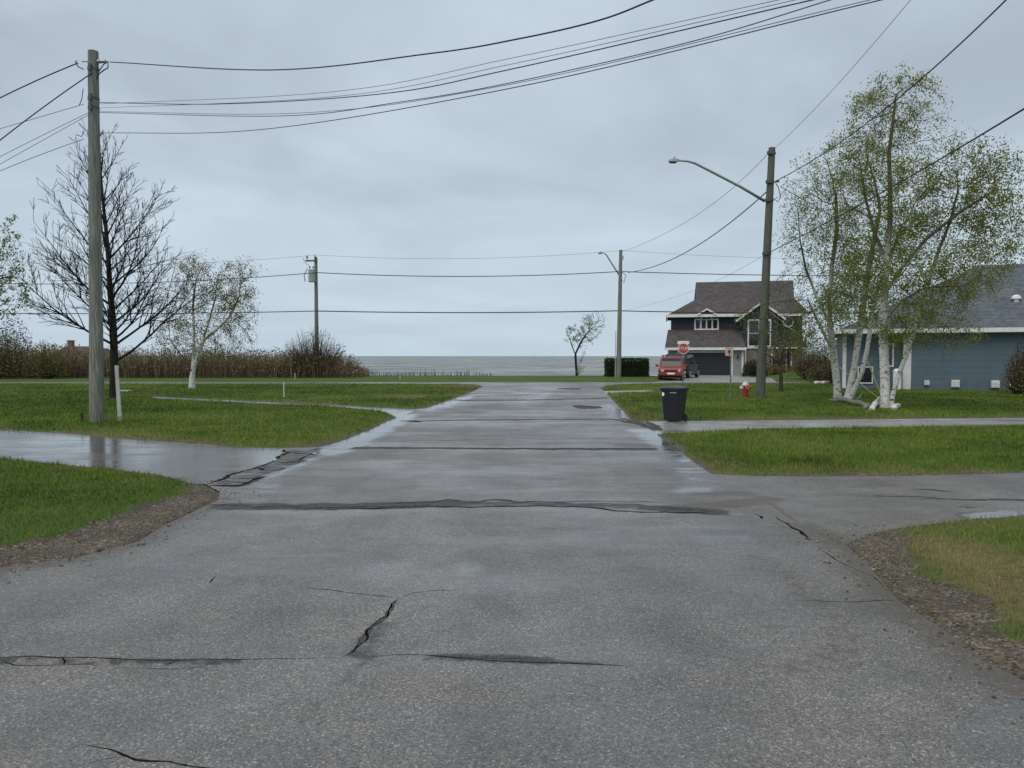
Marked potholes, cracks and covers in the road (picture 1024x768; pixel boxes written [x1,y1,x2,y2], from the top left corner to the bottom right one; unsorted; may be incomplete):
crack [2,588,625,669]
crack [888,489,1024,508]
crack [83,744,209,768]
